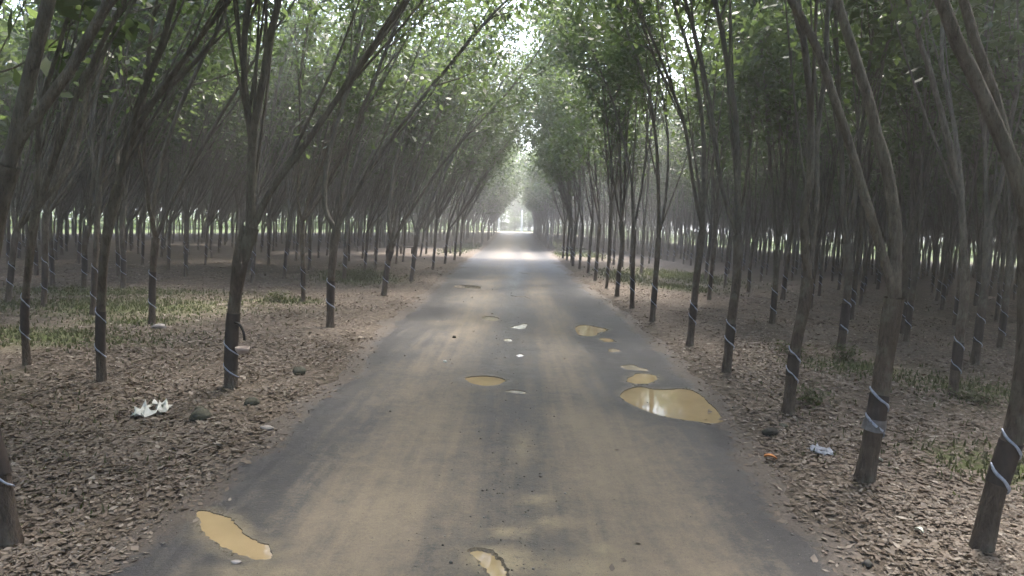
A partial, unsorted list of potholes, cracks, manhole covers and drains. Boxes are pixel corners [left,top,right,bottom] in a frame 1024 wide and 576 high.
pothole [465,376,506,386]
pothole [195,510,273,560]
pothole [467,547,510,576]
pothole [627,373,658,384]
pothole [620,386,724,423]
pothole [575,325,608,336]
